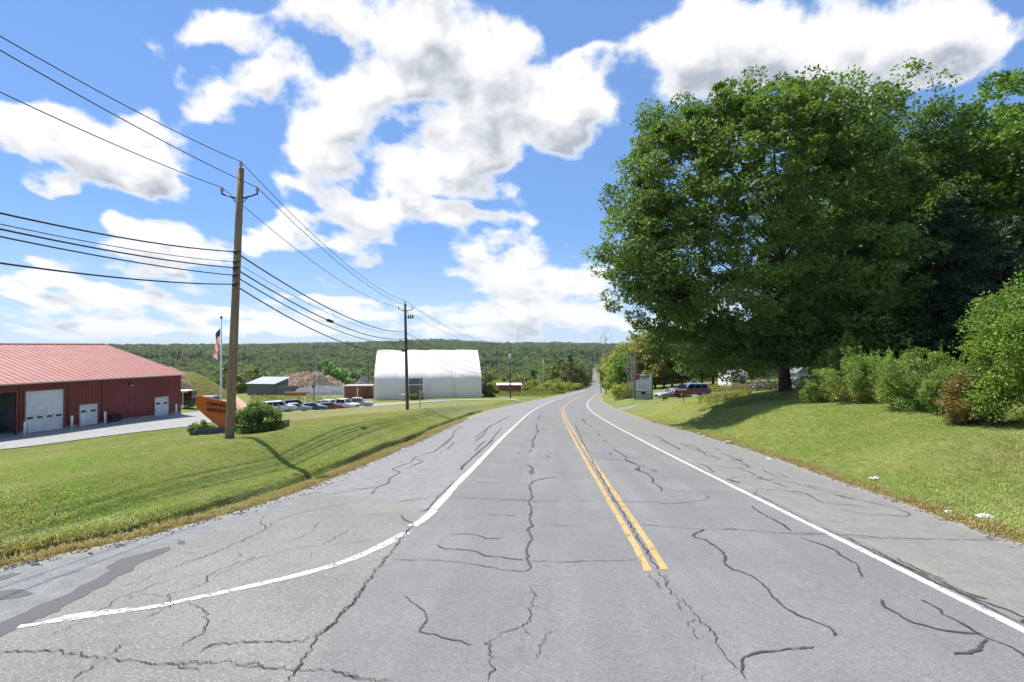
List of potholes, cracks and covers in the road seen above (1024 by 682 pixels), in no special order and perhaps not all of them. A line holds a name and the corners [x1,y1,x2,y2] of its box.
crack [485,586,552,680]
crack [3,502,390,681]
